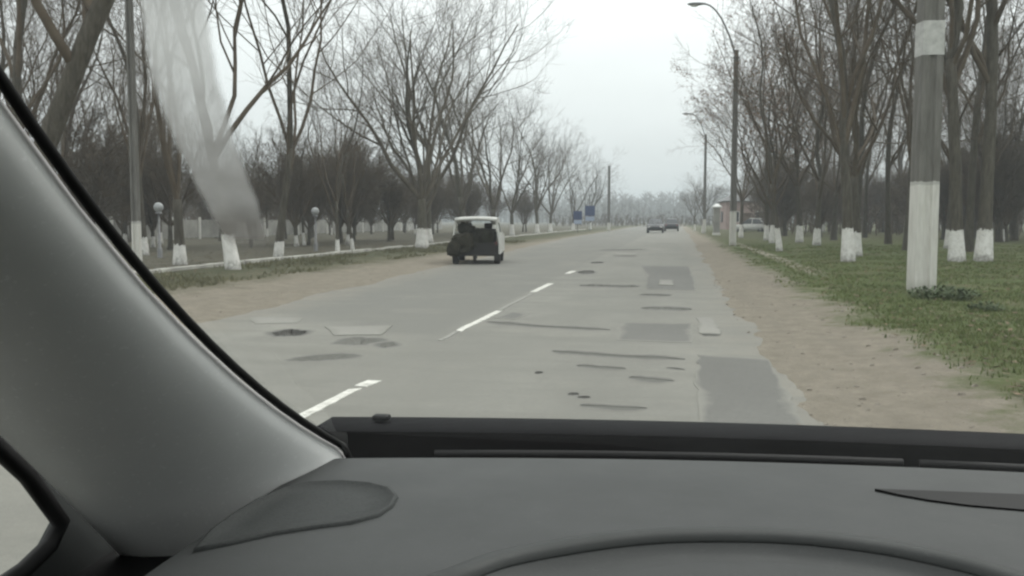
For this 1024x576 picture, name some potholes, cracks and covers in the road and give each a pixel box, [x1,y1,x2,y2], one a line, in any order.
pothole [368,341,405,349]
pothole [262,328,317,338]
pothole [327,336,391,346]
